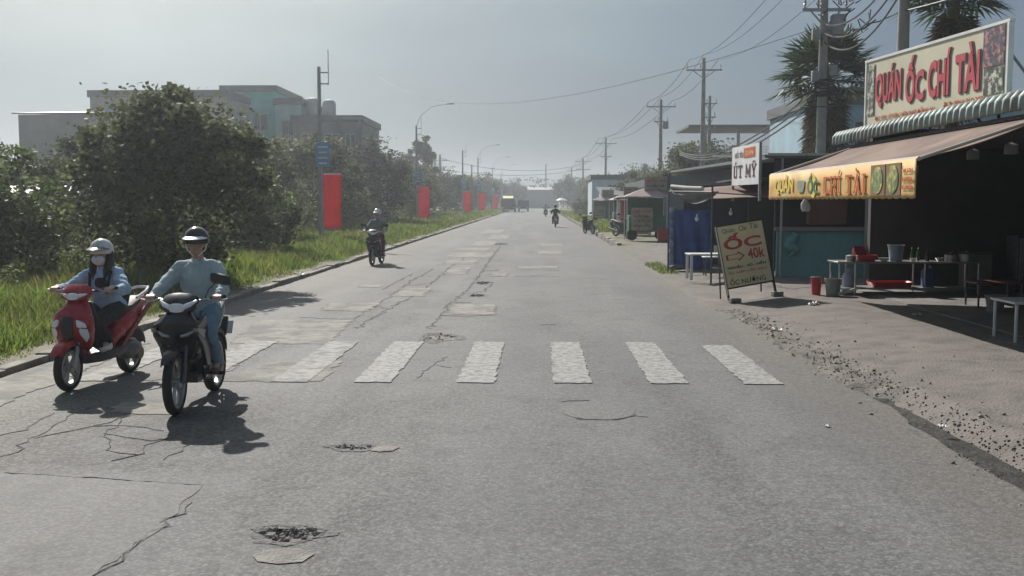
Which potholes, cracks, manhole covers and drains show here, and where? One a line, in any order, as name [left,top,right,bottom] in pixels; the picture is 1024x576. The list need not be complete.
pothole [250,523,340,546]
pothole [417,332,466,343]
crack [563,400,645,420]
crack [0,404,200,461]
pothole [322,443,382,452]
crack [316,246,501,334]
crack [92,502,192,576]
